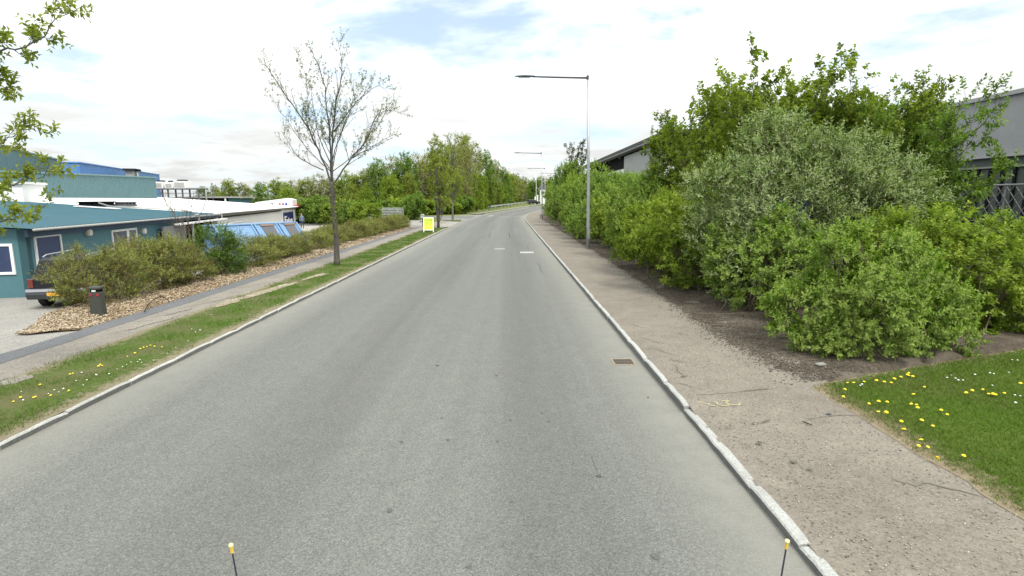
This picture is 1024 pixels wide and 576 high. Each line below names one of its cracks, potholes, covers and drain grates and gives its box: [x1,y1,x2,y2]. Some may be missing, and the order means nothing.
crack [891,478,987,498]
